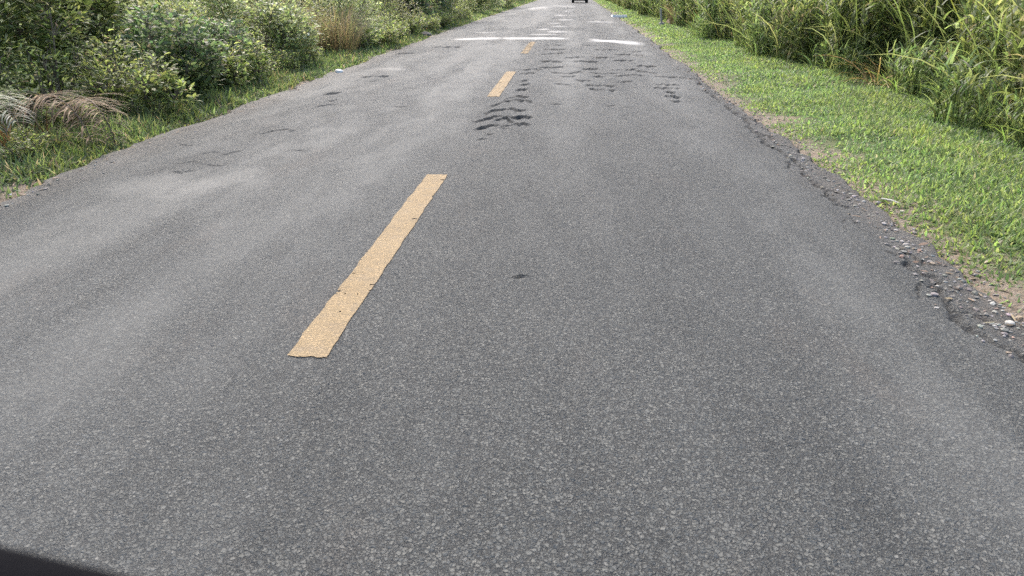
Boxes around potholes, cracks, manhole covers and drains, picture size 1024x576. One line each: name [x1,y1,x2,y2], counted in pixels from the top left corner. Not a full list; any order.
crack [260,129,306,153]
crack [359,75,390,83]
crack [314,91,342,108]
crack [170,144,242,175]
